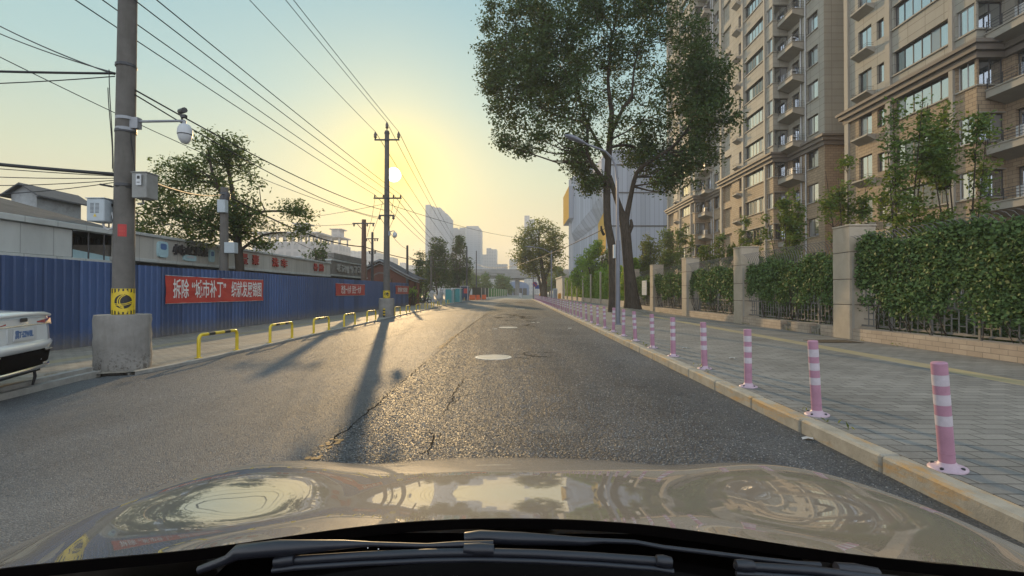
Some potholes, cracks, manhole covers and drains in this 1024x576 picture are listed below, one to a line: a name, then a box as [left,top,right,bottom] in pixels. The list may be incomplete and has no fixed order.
crack [326,302,541,449]
